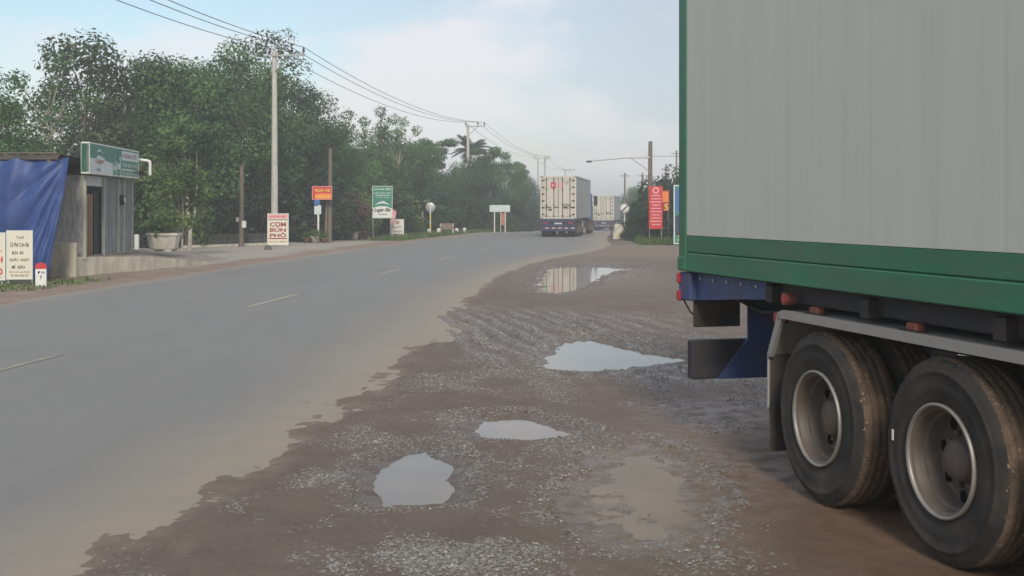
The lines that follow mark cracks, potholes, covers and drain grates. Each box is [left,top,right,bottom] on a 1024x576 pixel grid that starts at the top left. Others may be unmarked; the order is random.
pothole [516,262,667,294]
pothole [532,330,688,372]
pothole [530,433,745,566]
pothole [453,407,598,440]
pothole [346,436,484,508]
